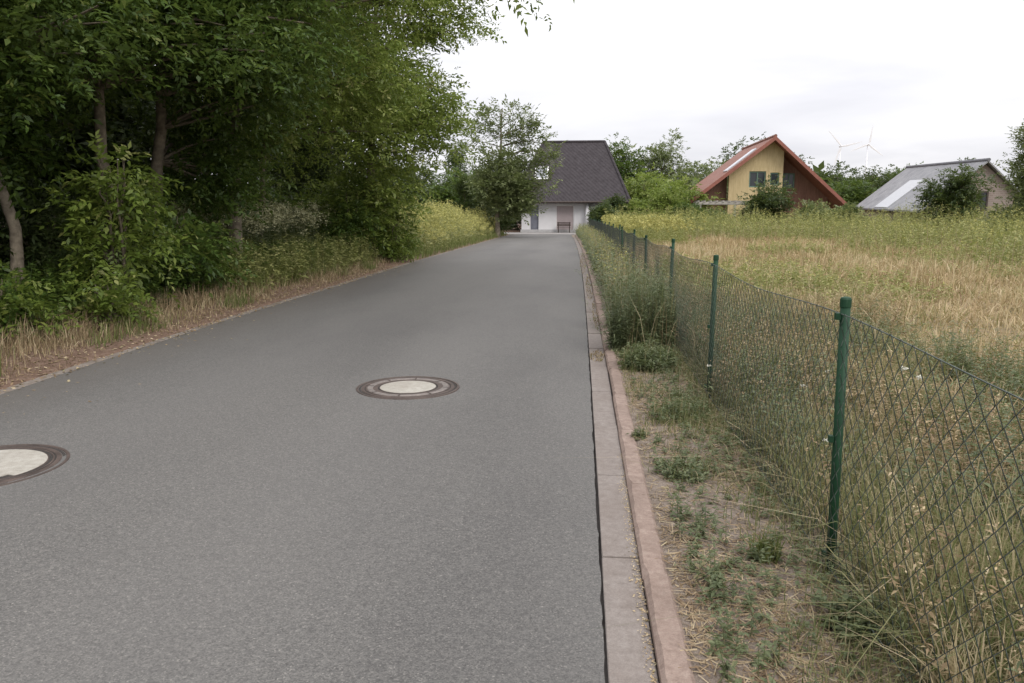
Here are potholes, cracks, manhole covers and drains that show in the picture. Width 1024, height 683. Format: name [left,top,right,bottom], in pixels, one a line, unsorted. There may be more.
manhole cover [356,376,460,400]
manhole cover [0,444,70,486]
